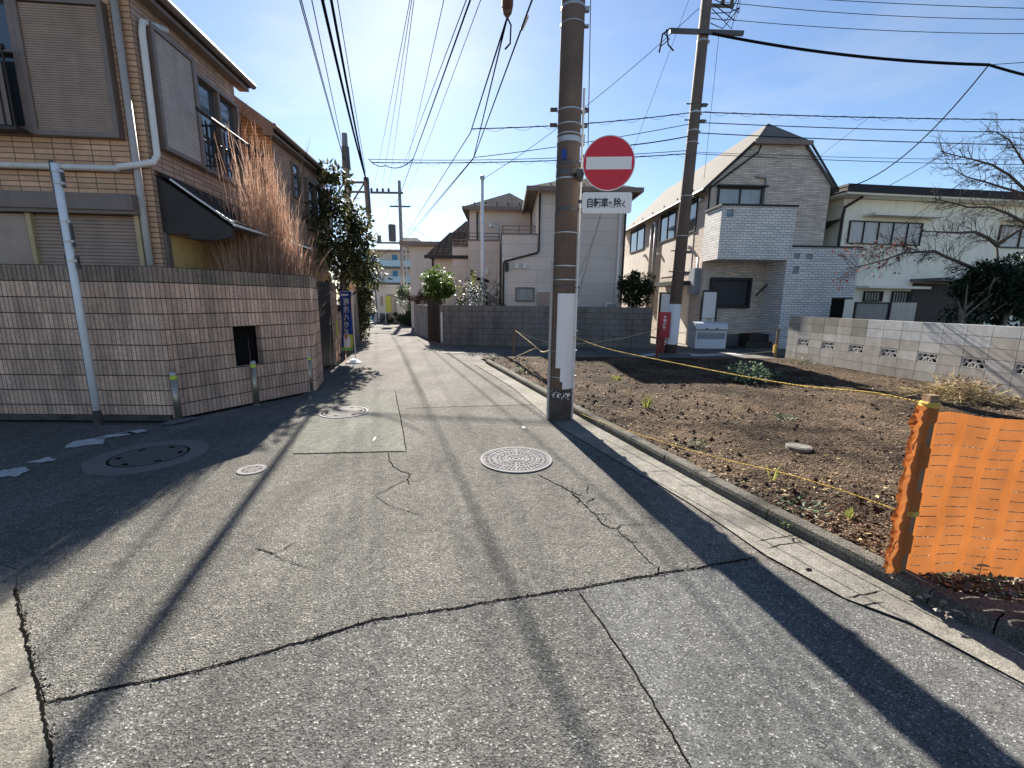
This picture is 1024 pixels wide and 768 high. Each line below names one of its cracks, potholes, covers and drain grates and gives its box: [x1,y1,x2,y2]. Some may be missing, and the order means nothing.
manhole cover [81,440,210,475]
manhole cover [318,406,369,418]
manhole cover [236,464,267,475]
crack [377,454,422,516]
crack [0,585,62,768]
crack [541,476,661,573]
manhole cover [480,447,552,474]
